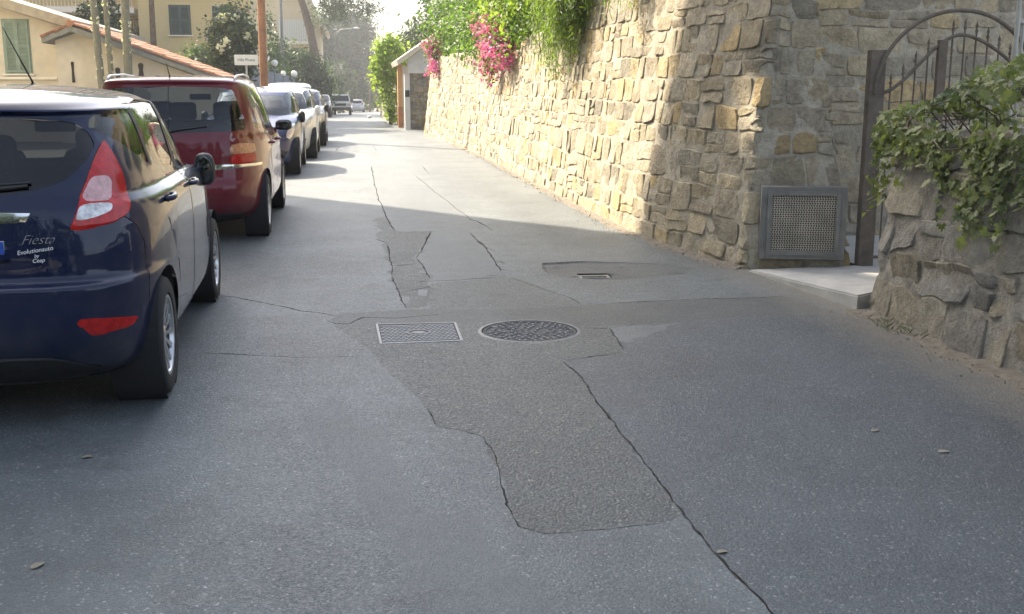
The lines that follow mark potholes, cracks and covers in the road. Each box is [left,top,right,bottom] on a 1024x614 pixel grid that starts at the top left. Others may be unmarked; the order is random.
crack [426,323,775,614]
crack [226,146,582,324]
manhole cover [375,322,463,344]
manhole cover [478,320,581,344]
